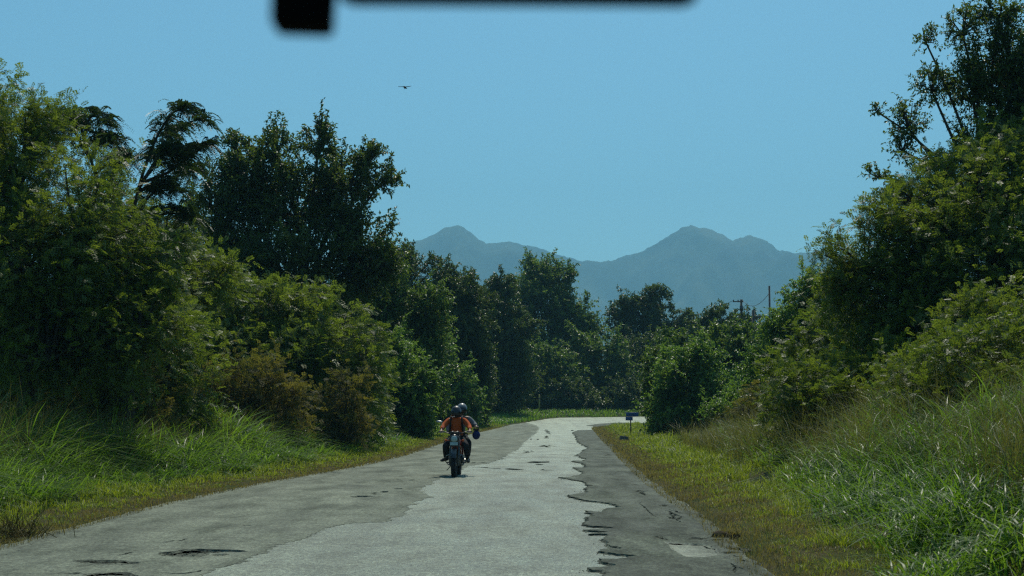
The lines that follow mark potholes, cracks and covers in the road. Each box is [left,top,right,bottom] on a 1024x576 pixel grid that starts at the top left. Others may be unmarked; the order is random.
crack [633,484,689,522]
pothole [156,549,248,558]
